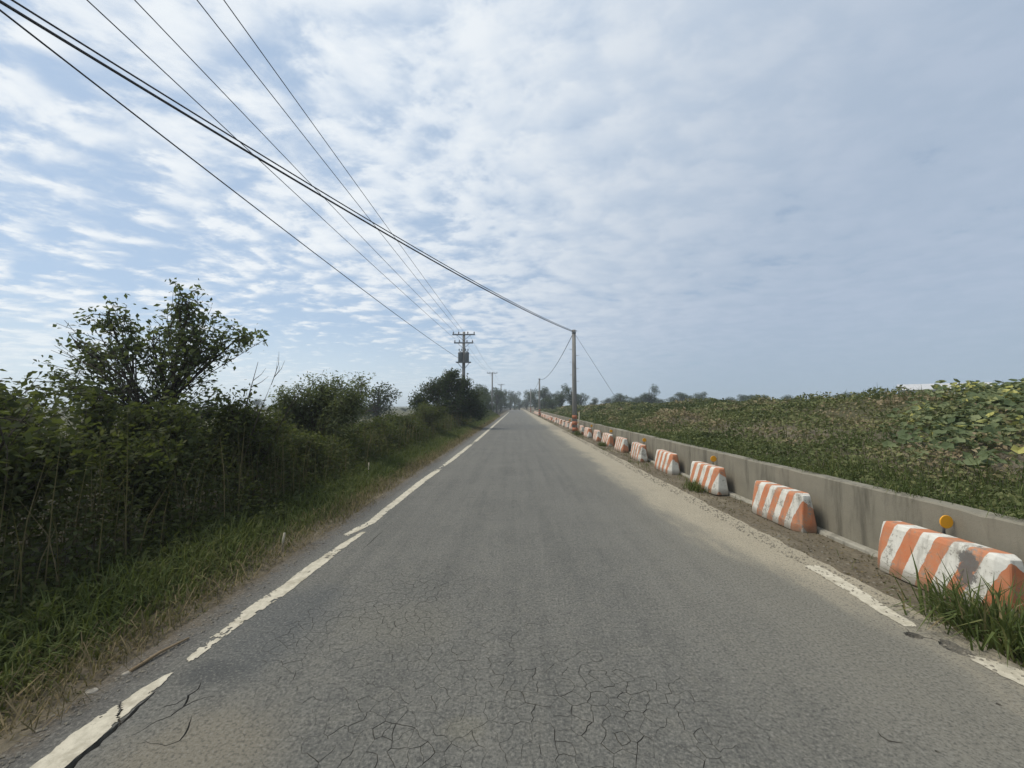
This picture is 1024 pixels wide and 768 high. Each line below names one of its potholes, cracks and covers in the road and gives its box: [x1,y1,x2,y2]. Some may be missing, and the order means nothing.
pothole [938,639,976,657]
crack [243,558,812,768]
crack [65,681,211,768]
